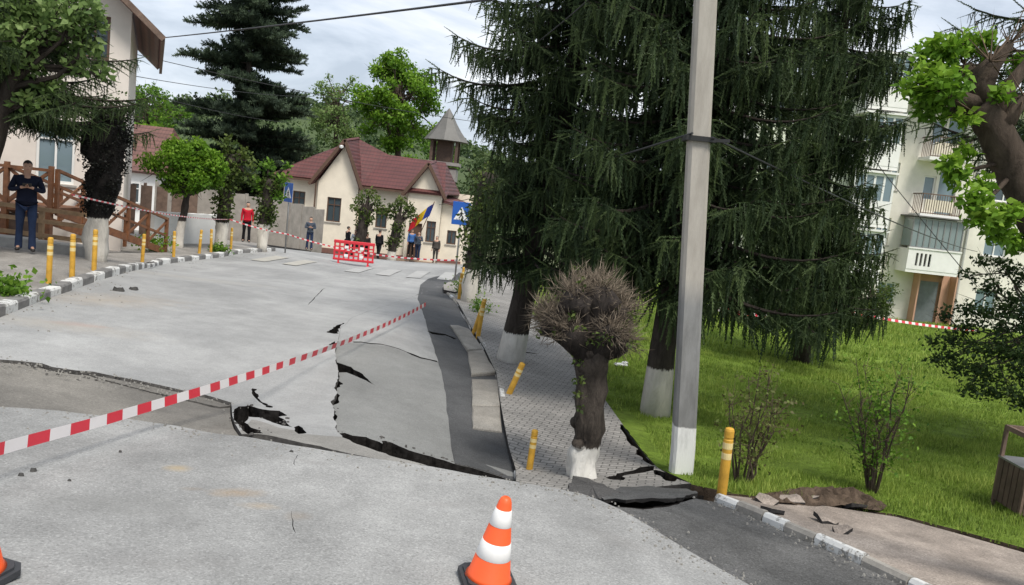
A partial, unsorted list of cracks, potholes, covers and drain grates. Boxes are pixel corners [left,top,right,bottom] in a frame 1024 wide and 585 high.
crack [327,323,503,475]
crack [11,362,124,384]
crack [606,426,704,509]
crack [251,388,272,408]
